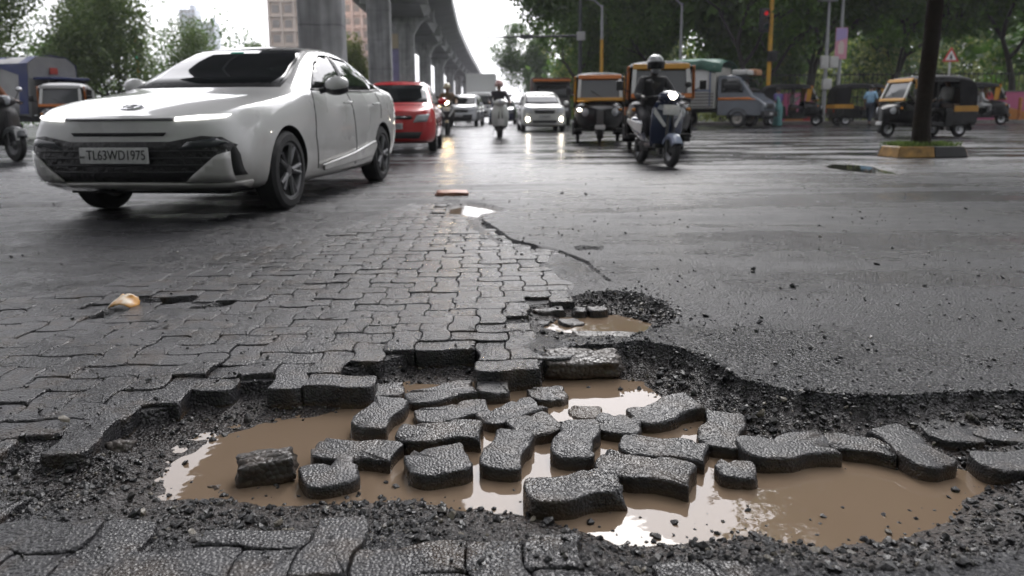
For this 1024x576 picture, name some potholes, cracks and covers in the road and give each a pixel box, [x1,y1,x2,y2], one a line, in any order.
pothole [443,200,511,220]
pothole [808,161,925,177]
crack [479,219,611,281]
pothole [139,297,198,305]
pothole [525,290,676,339]
pothole [0,340,1024,576]
